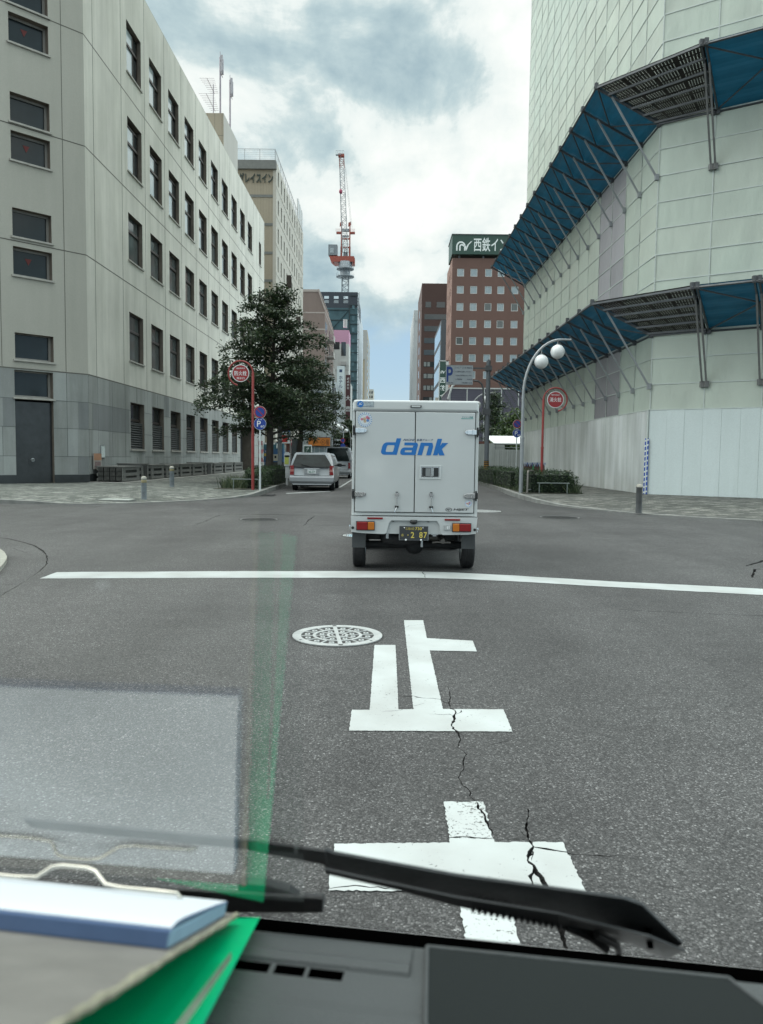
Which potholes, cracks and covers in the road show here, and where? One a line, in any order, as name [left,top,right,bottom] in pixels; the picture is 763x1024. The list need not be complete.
crack [407,687,610,949]
manhole cover [290,625,384,647]
